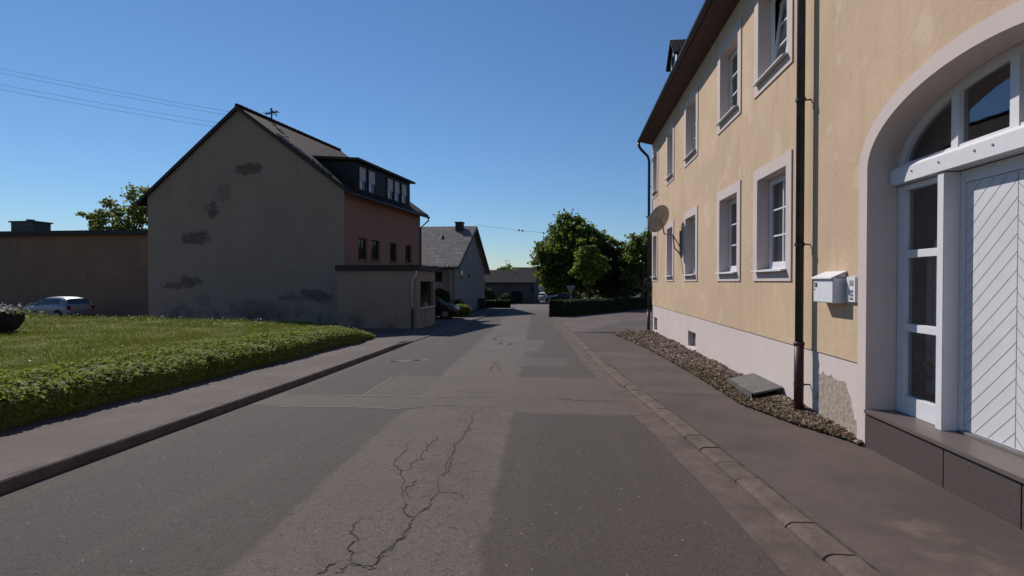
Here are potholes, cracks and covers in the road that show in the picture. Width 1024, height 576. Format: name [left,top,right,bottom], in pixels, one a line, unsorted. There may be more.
crack [314,404,507,574]
